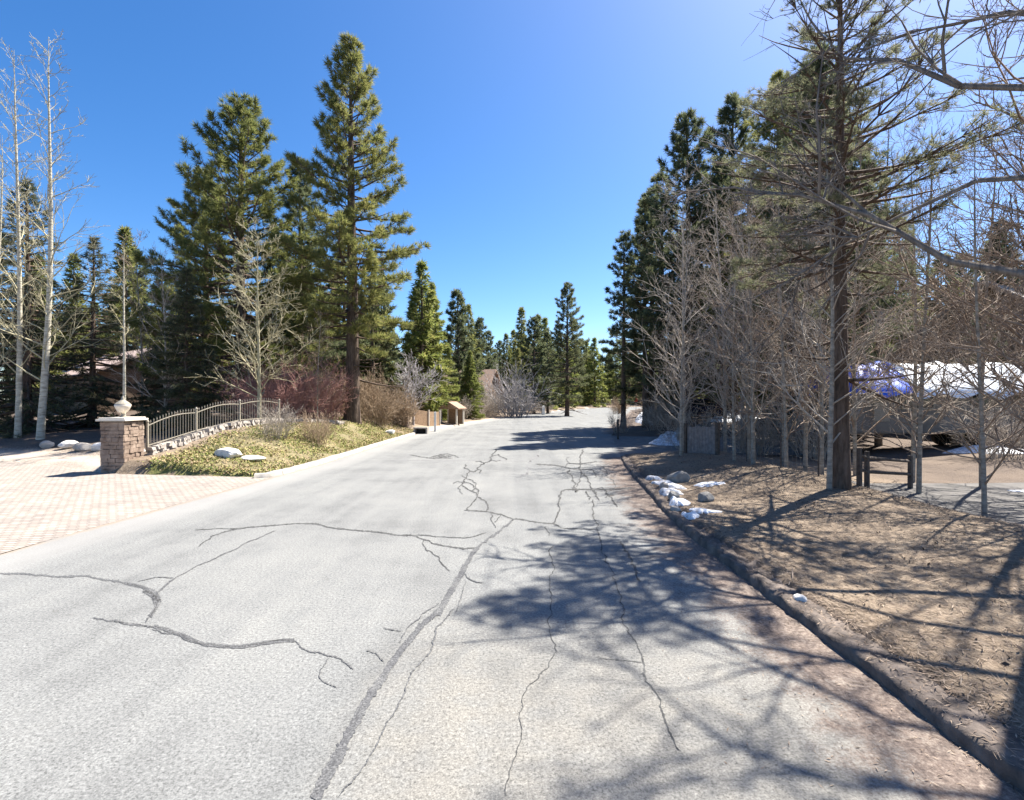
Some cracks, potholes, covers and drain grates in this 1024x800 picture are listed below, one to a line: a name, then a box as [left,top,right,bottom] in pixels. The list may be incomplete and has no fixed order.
crack [0,449,679,800]
